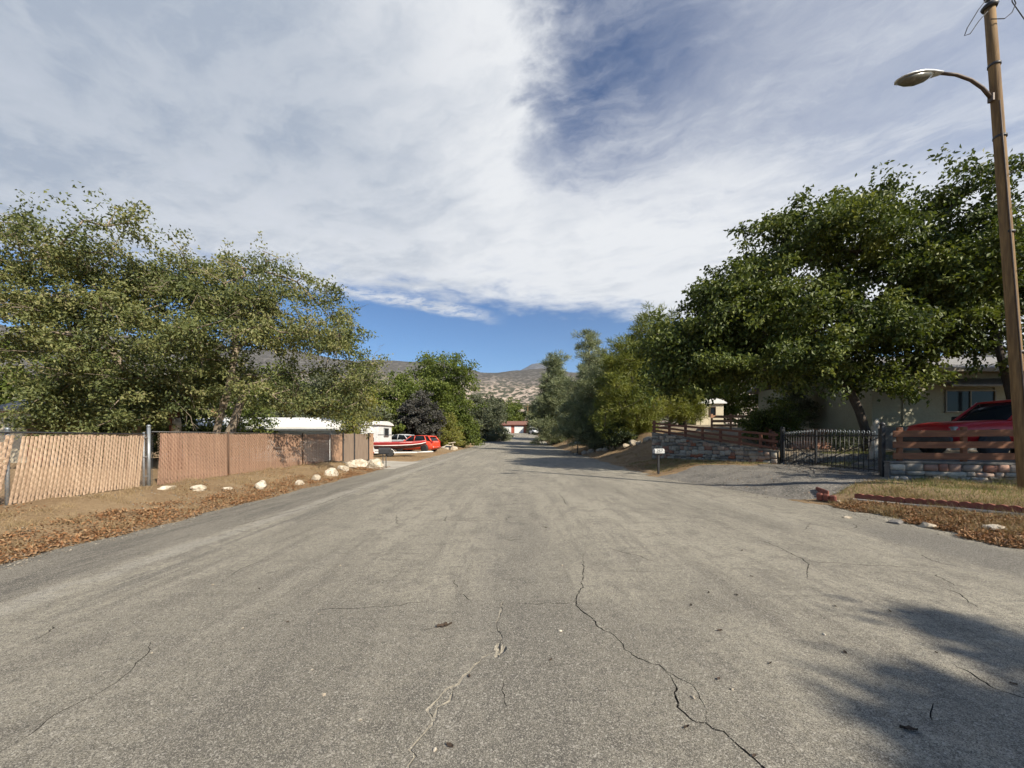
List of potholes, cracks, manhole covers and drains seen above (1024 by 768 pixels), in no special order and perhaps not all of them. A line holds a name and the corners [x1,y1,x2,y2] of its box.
crack [761,540,910,579]
crack [407,602,507,768]
crack [516,554,765,768]
crack [2,642,151,751]
